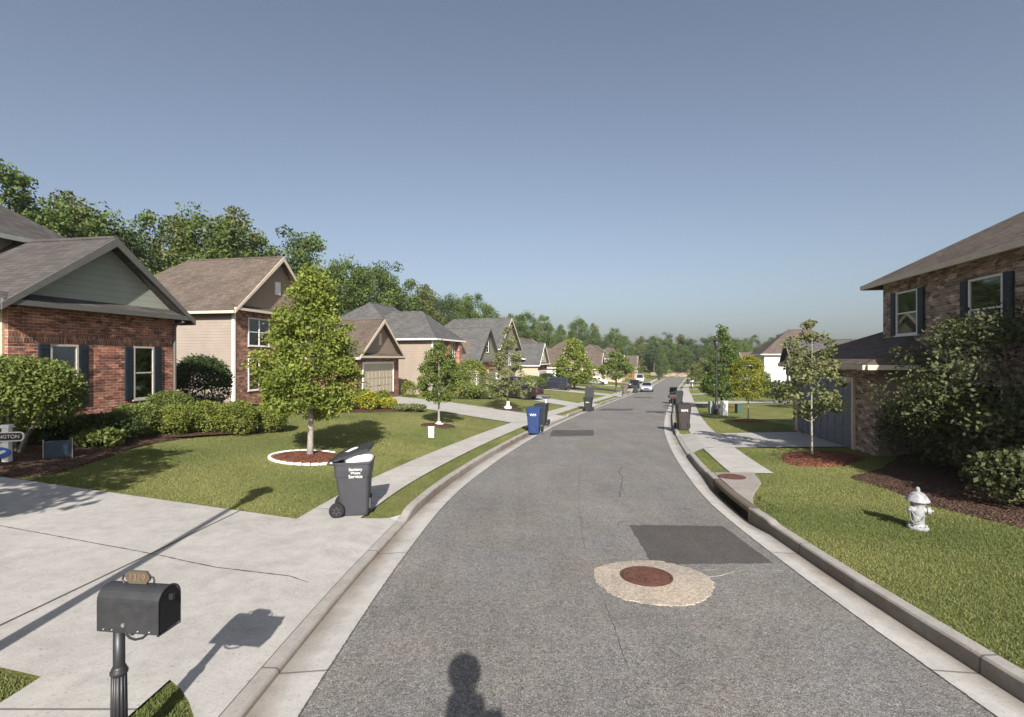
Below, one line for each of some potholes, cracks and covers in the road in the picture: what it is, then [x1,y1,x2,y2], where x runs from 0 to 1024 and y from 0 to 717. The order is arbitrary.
drain grate [713,472,776,537]
